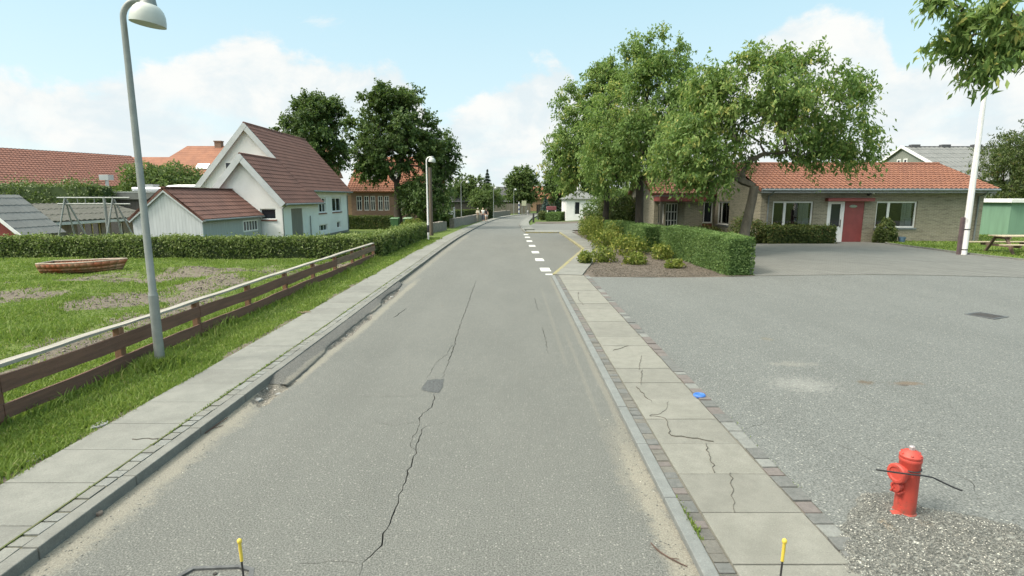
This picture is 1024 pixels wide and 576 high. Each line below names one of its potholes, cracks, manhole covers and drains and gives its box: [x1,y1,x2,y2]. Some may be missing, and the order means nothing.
manhole cover [965,312,1008,320]
crack [613,346,735,513]
pothole [251,380,298,408]
crack [427,282,476,378]
pothole [326,313,373,351]
crack [303,395,445,573]
